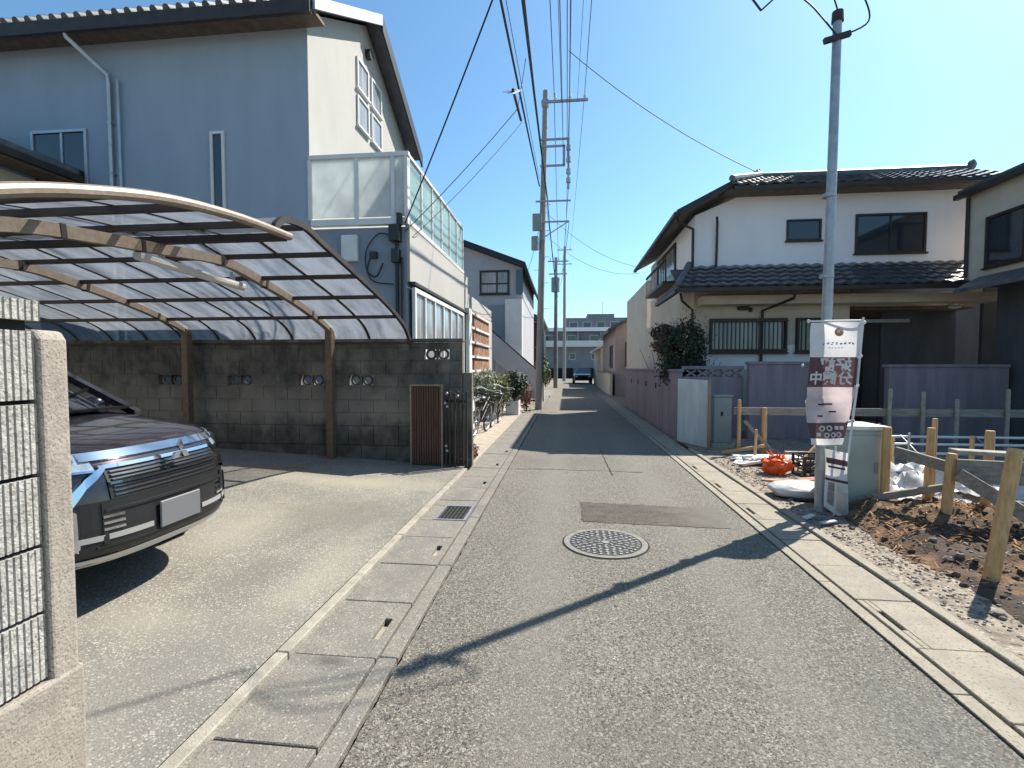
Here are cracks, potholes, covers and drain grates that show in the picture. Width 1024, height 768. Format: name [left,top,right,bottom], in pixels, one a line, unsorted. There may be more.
manhole cover [562,529,650,559]
drain grate [421,505,475,523]
